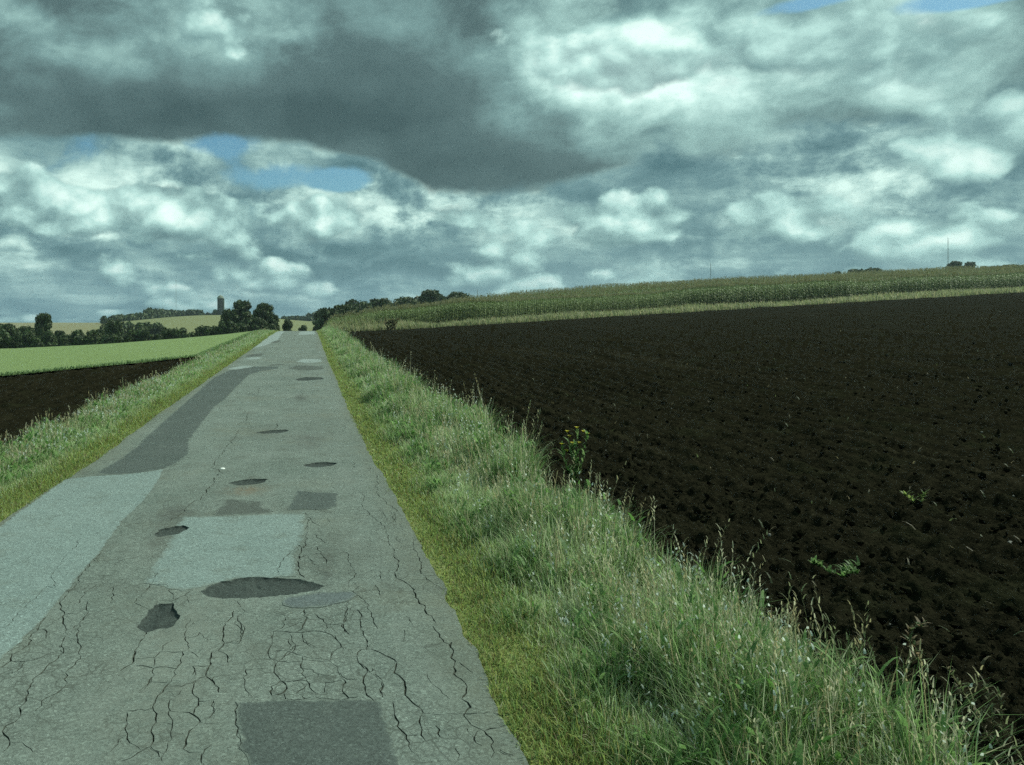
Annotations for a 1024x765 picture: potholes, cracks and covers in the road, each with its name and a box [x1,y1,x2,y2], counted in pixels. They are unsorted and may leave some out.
crack [1,548,101,752]
pothole [137,603,180,633]
pothole [155,525,189,537]
crack [114,601,245,763]
crack [234,492,511,758]
pothole [201,577,323,599]
